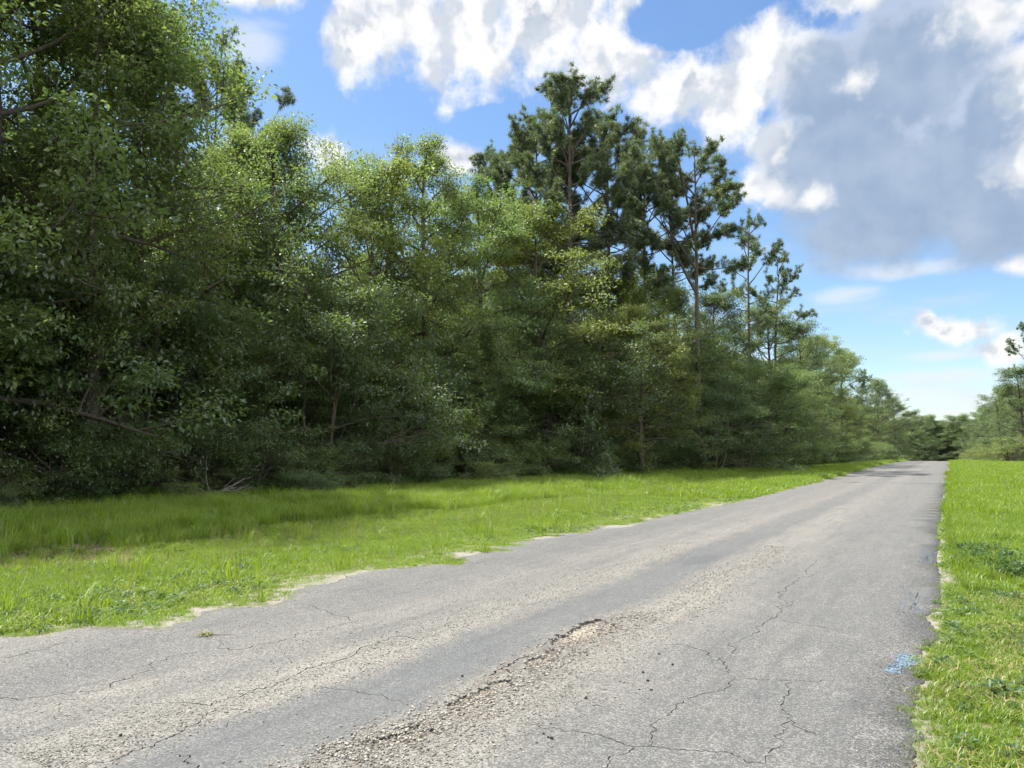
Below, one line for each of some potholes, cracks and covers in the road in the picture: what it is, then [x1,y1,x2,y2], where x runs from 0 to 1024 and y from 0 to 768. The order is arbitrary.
crack [525,557,825,768]
pothole [444,680,515,710]
pothole [359,724,436,747]
pothole [550,618,622,648]
pothole [524,649,563,667]
crack [0,653,188,700]
crack [215,604,369,650]
crack [86,636,430,766]
